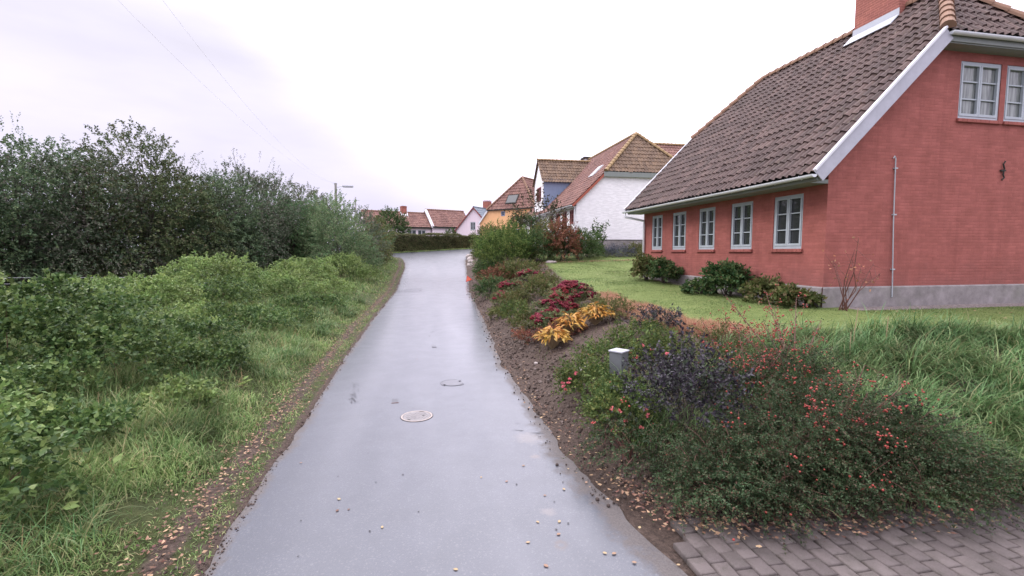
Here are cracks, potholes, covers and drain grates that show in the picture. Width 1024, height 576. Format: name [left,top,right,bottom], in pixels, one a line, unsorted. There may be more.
manhole cover [400,411,433,422]
